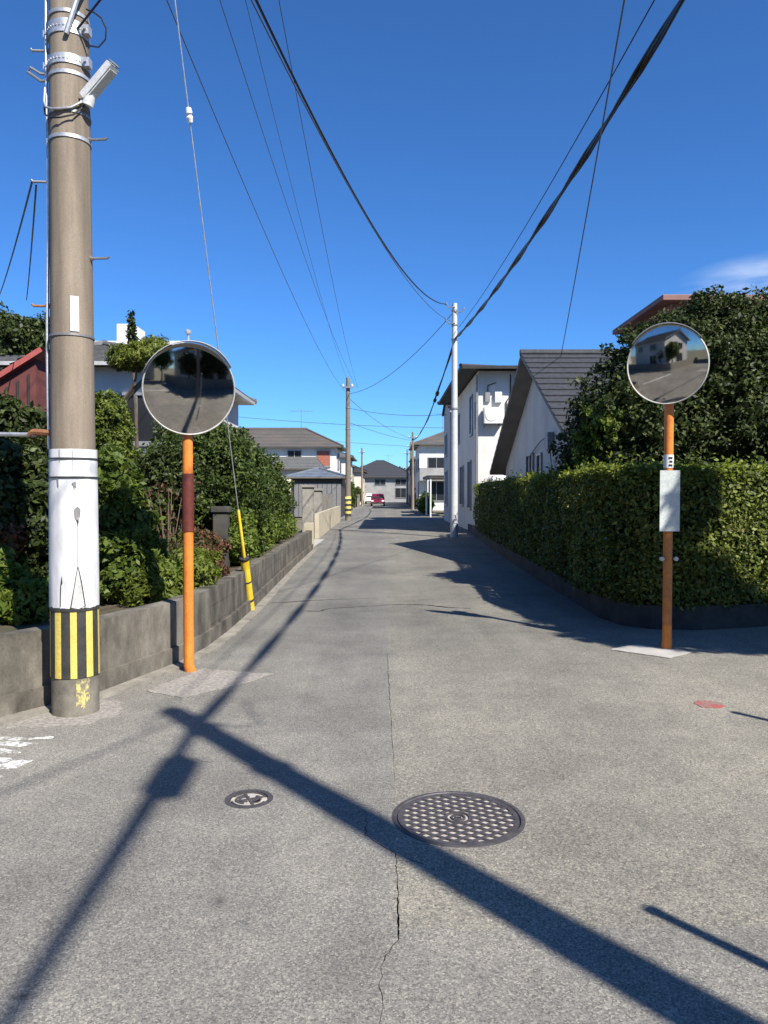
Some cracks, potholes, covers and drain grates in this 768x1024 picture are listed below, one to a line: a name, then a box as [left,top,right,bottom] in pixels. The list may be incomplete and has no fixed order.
crack [364,814,425,1024]
manhole cover [392,791,526,848]
manhole cover [224,789,273,809]
